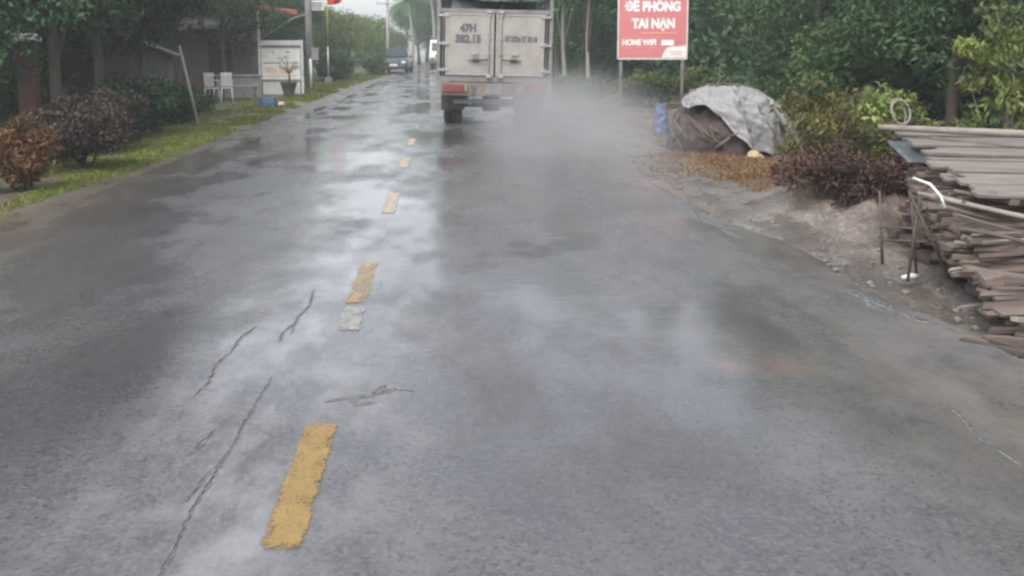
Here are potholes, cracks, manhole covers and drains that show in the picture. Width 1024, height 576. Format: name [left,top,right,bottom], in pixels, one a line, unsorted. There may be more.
crack [279,290,315,342]
crack [326,385,414,406]
crack [943,398,1024,470]
crack [157,326,272,576]
